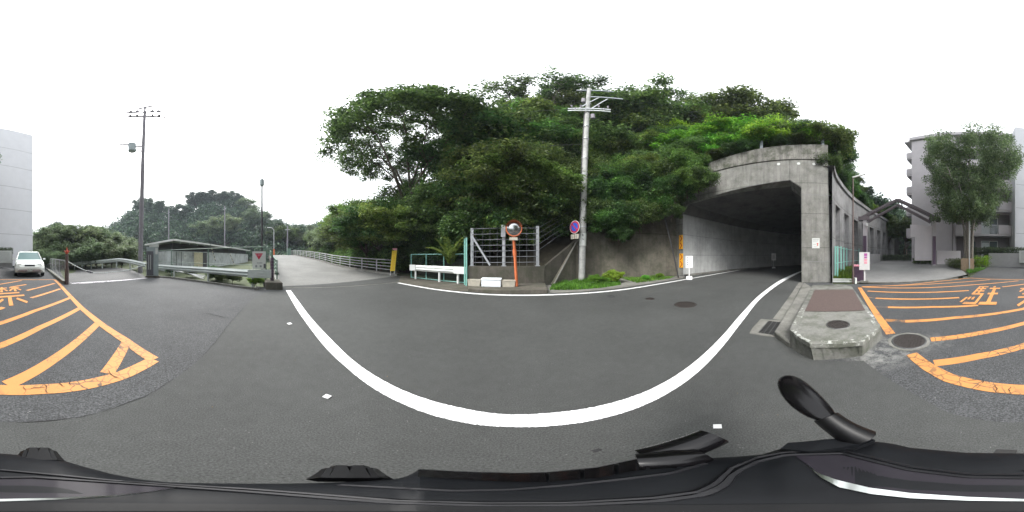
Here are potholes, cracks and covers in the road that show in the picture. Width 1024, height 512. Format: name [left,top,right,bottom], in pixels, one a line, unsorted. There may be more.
drain grate [750,319,782,337]
manhole cover [888,333,930,351]
manhole cover [825,320,851,330]
